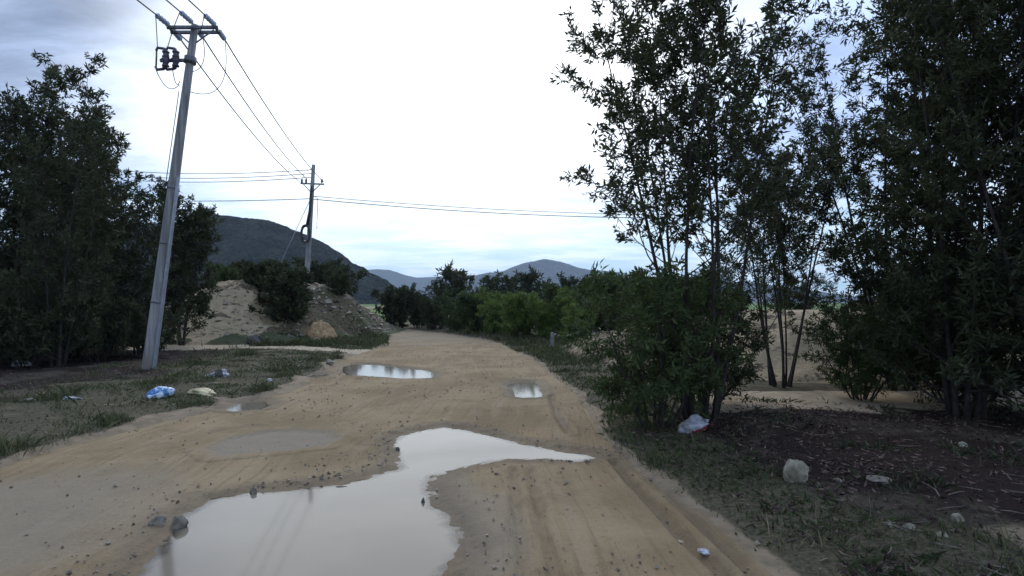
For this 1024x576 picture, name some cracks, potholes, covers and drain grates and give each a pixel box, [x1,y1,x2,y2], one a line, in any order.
pothole [89,421,631,576]
pothole [494,379,556,400]
pothole [205,395,288,414]
pothole [334,362,445,379]
